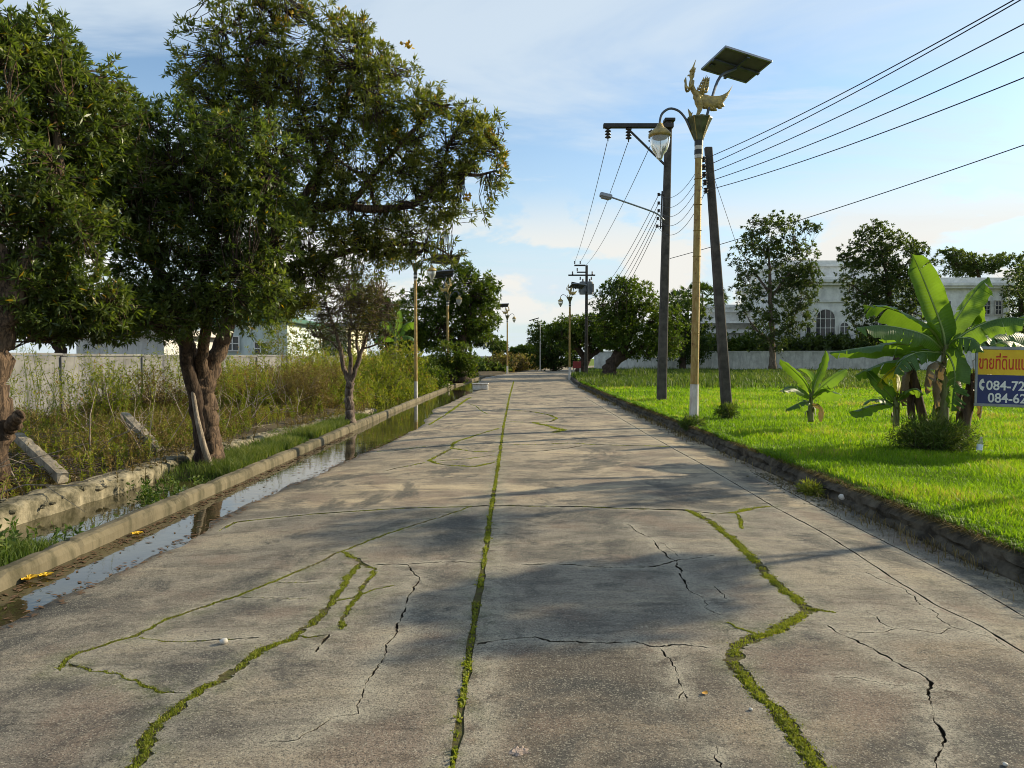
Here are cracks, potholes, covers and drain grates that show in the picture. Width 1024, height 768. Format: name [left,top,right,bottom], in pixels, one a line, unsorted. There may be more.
crack [54,506,481,768]
crack [477,509,997,768]
crack [377,397,669,471]
